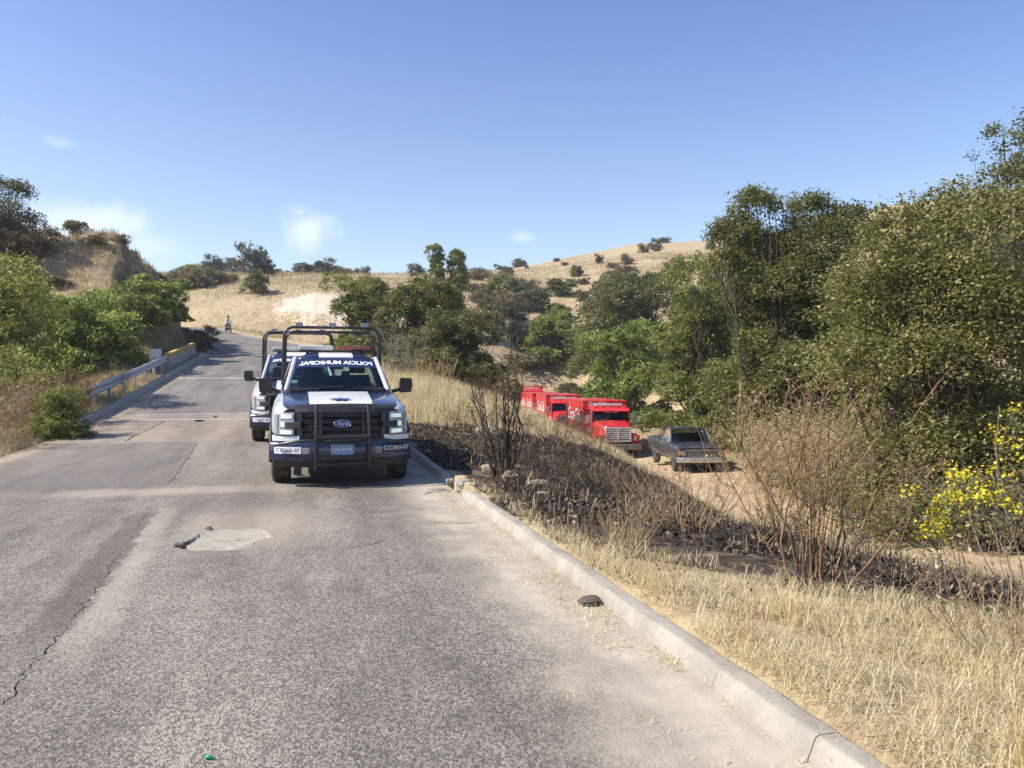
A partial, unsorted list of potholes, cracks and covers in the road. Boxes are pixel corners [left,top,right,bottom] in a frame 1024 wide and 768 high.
crack [2,509,148,705]
crack [69,443,210,499]
